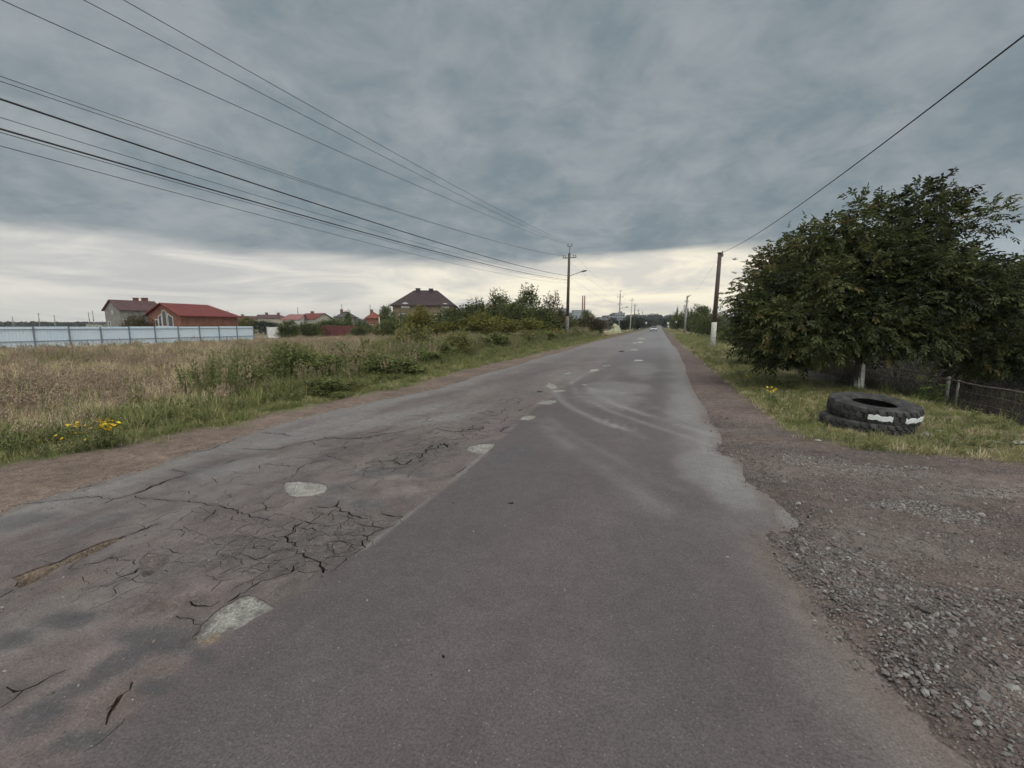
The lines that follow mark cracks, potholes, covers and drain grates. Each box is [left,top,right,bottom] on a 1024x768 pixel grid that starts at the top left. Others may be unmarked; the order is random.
crack [1,398,538,607]
pothole [12,536,127,588]
crack [84,682,133,752]
crack [176,502,403,635]
crack [0,670,66,708]
pothole [138,553,170,577]
